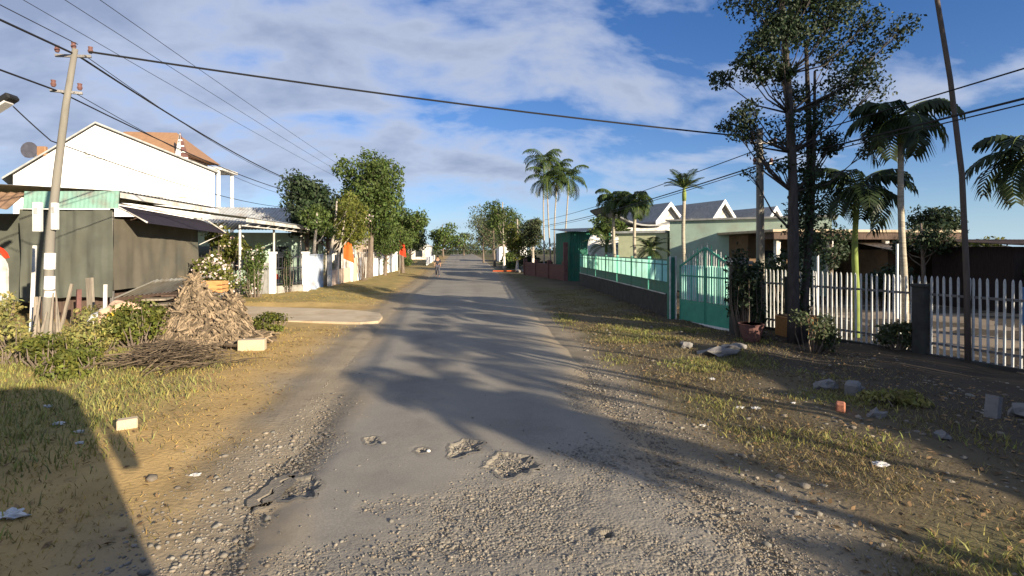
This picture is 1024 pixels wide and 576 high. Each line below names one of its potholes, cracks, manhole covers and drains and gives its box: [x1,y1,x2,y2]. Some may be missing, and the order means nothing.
pothole [445,438,486,460]
pothole [412,446,432,455]
pothole [272,473,327,503]
pothole [479,451,544,480]
pothole [594,527,620,542]
pothole [361,435,383,446]
